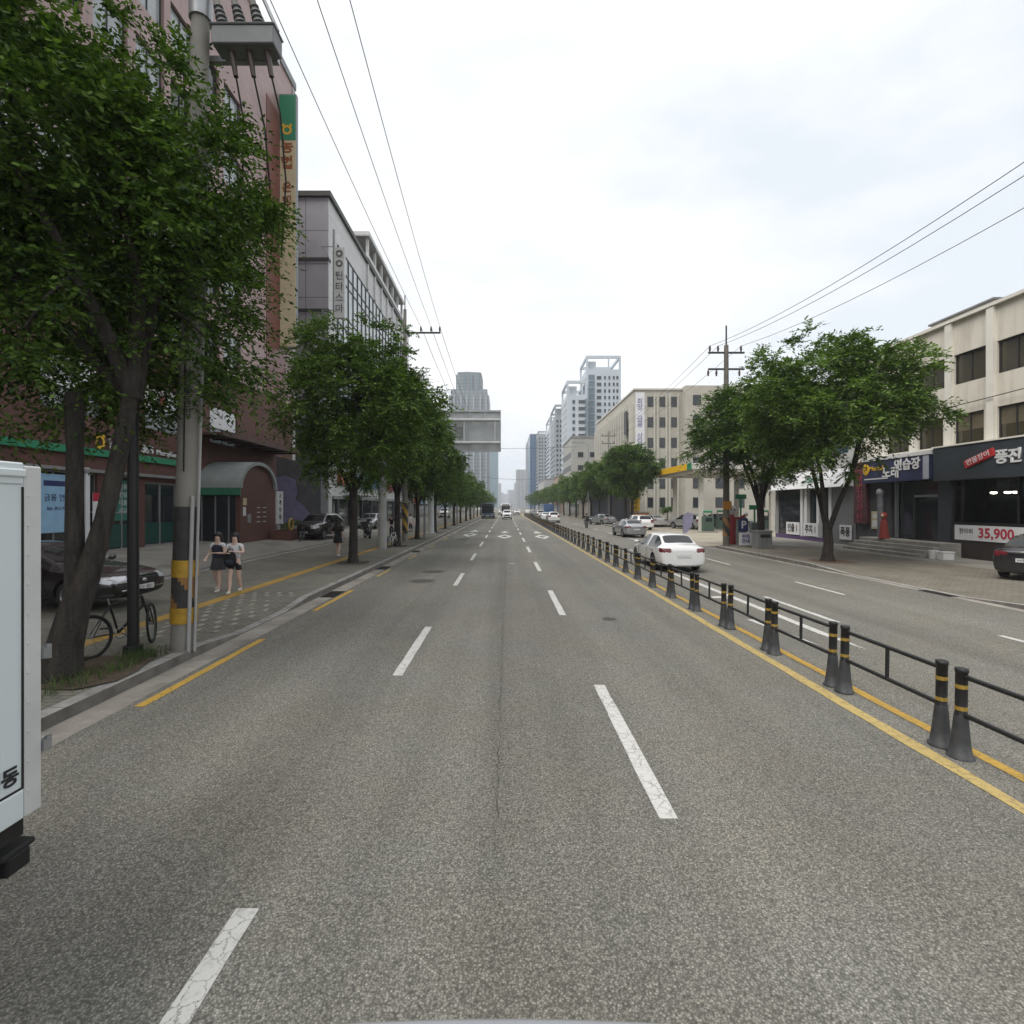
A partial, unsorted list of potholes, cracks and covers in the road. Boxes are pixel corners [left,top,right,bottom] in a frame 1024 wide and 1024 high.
crack [492,566,506,839]
